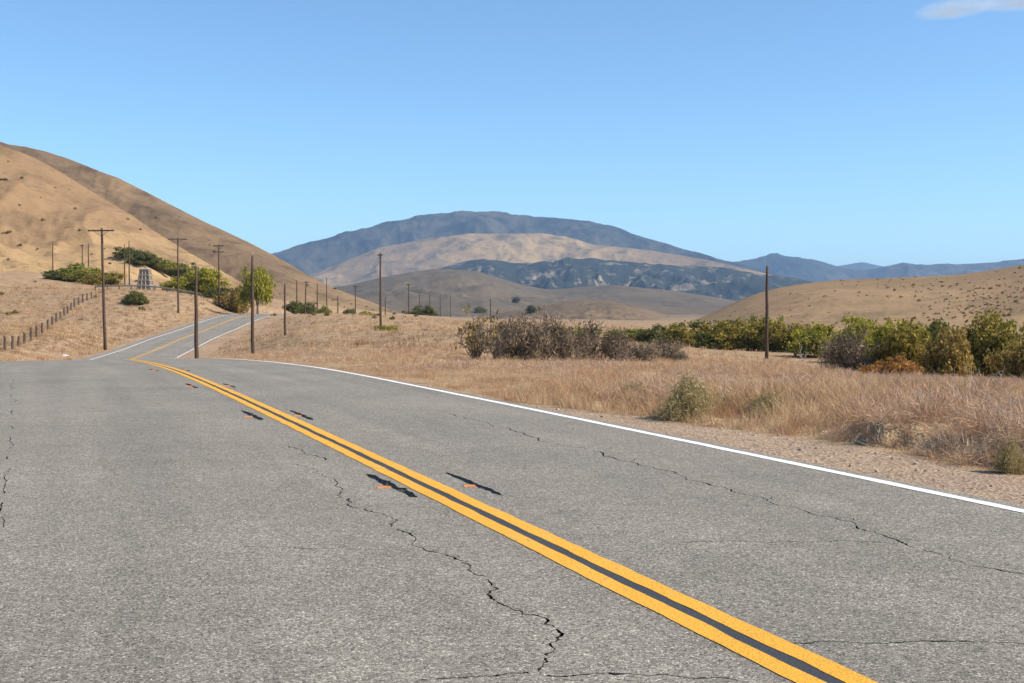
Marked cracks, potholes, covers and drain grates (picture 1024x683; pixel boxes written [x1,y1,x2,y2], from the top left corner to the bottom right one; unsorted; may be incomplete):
pothole [365,474,417,497]
pothole [446,472,503,496]
crack [454,414,1023,574]
crack [0,381,17,527]
crack [245,464,738,681]
